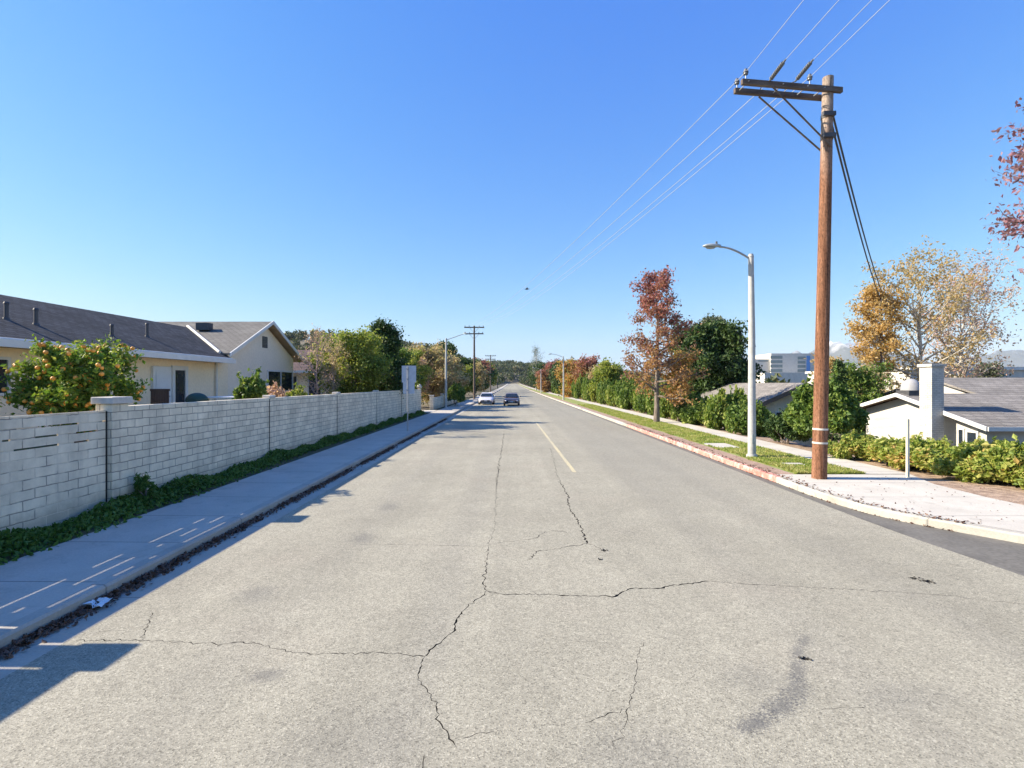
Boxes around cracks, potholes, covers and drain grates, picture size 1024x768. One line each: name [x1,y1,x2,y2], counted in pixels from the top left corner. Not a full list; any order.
crack [75,434,1019,768]
